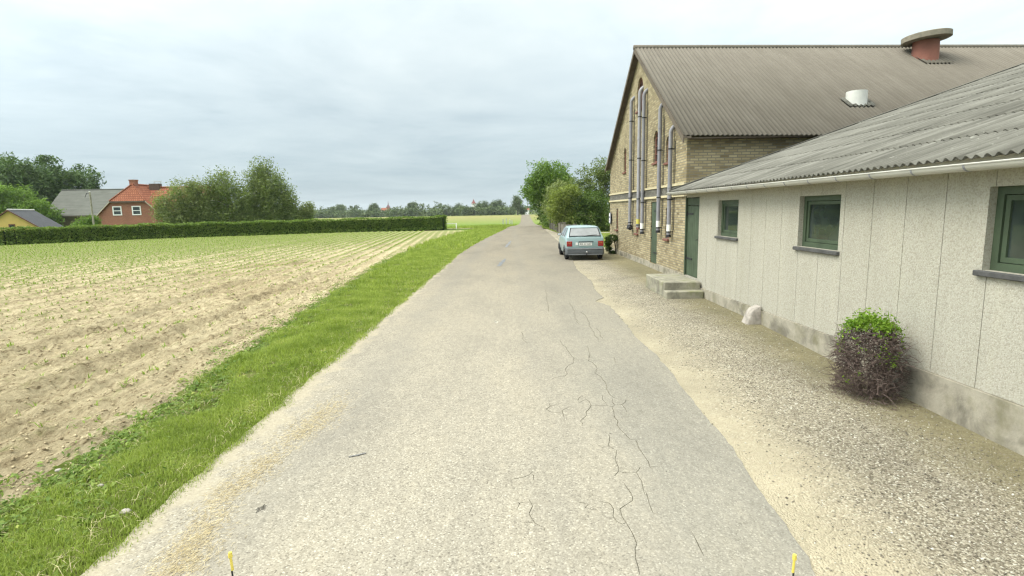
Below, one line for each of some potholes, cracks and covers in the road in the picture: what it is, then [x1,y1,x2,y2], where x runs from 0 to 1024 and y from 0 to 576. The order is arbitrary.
crack [546,305,655,575]
